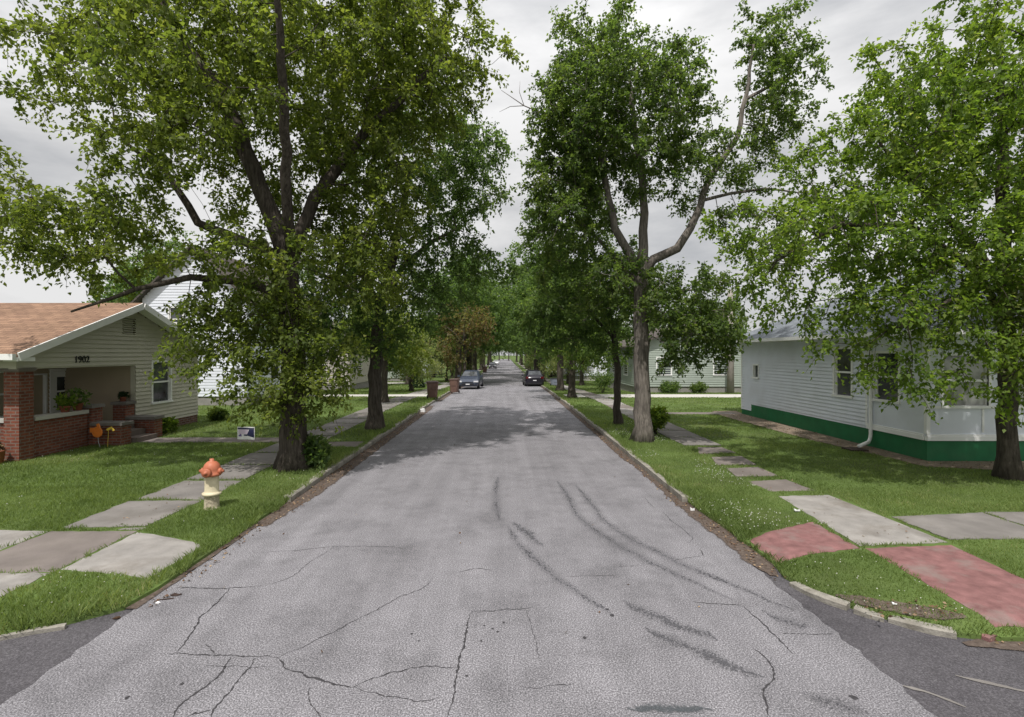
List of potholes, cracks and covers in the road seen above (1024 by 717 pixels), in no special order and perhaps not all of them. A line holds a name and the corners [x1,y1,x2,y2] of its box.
crack [693,601,833,717]
crack [172,586,539,717]
